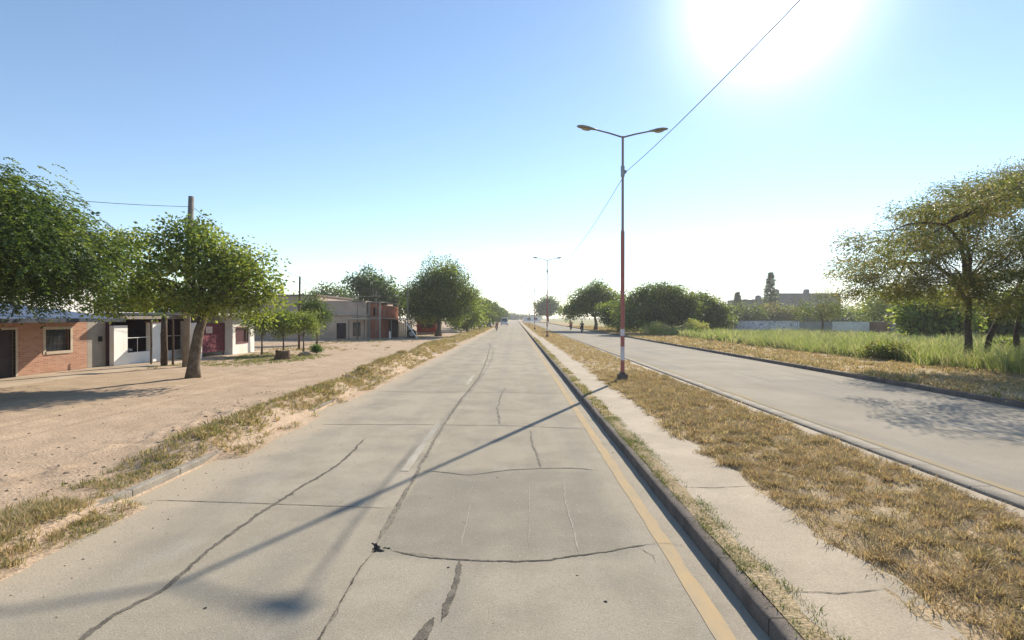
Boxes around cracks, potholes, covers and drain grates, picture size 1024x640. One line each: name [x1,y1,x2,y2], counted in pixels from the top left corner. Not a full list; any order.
crack [78,347,684,640]
